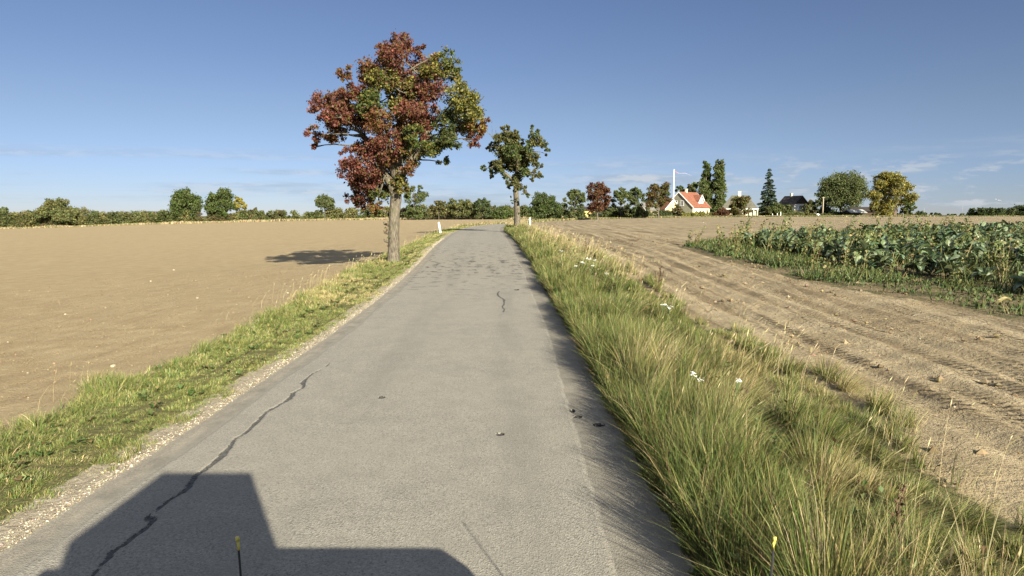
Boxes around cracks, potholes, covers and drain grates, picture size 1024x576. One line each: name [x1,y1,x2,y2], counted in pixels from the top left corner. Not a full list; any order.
crack [91,363,330,576]
